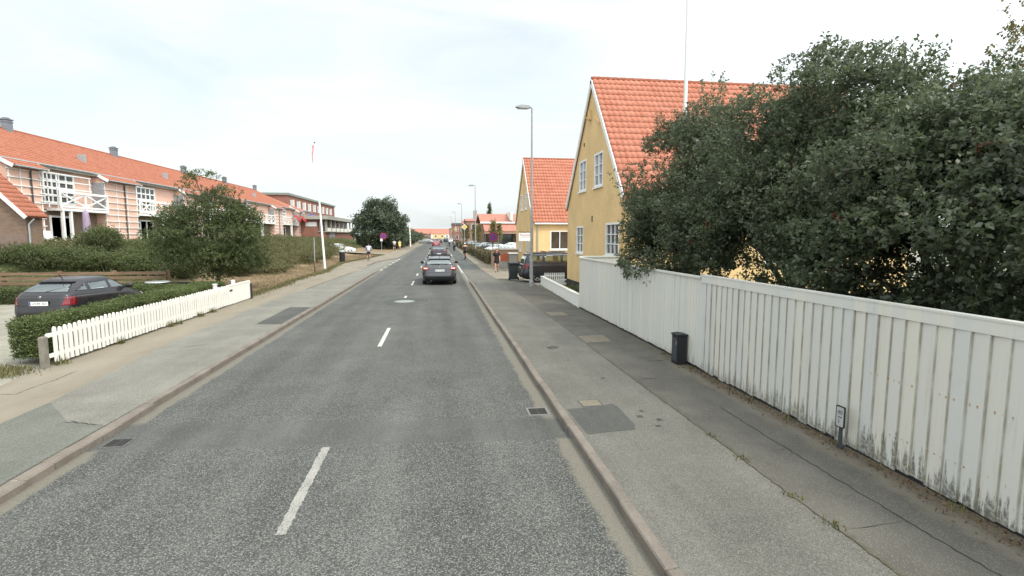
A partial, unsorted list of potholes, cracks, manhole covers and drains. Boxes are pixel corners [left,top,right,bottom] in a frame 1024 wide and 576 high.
drain grate [526,407,550,416]
manhole cover [577,399,604,407]
drain grate [98,437,138,449]
